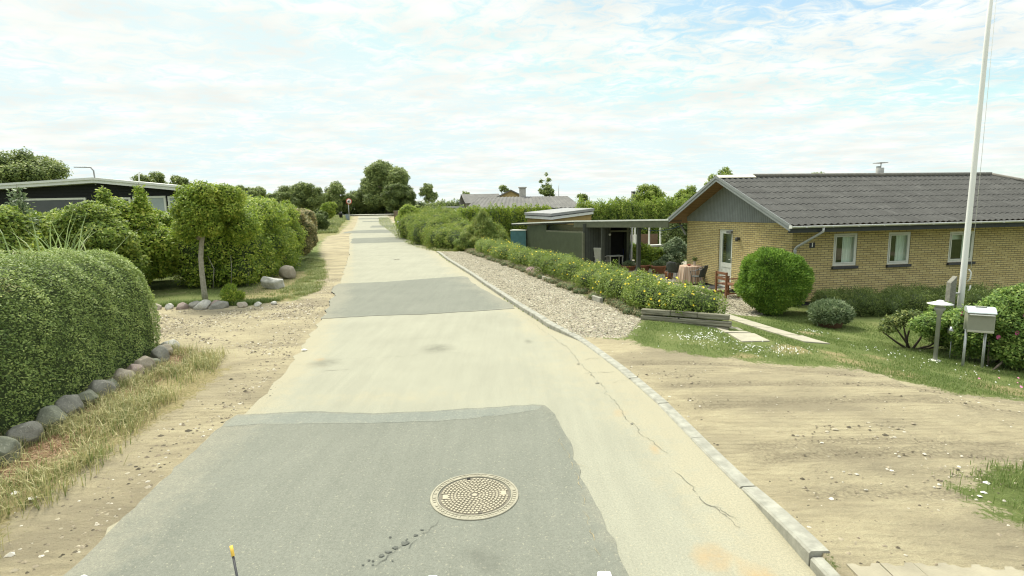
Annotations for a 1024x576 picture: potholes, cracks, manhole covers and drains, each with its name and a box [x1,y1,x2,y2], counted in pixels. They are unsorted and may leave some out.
manhole cover [430,473,519,521]
crack [528,319,661,449]
